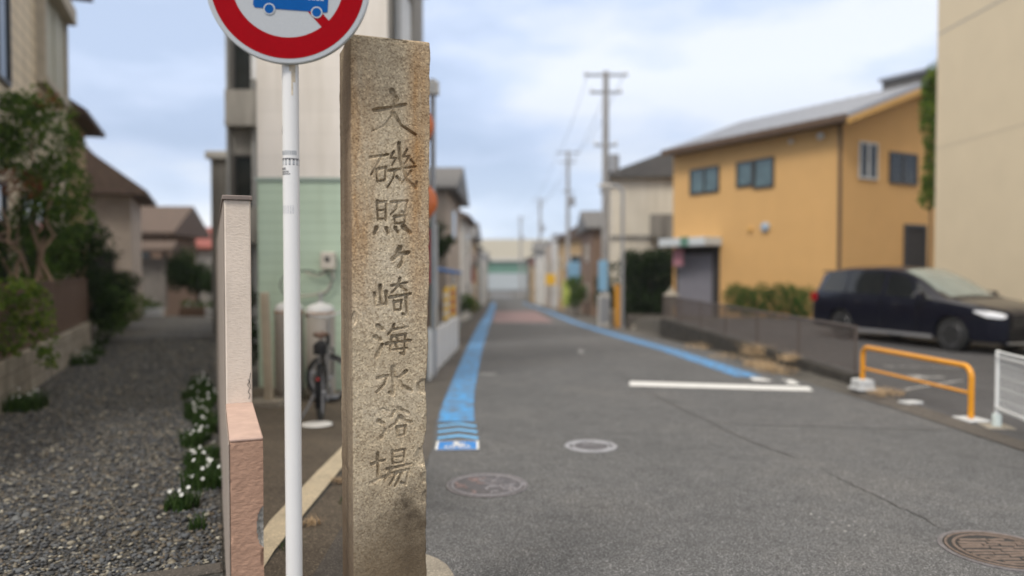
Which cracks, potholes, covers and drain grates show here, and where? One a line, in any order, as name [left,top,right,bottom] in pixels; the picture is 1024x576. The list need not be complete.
crack [829,473,944,529]
manhole cover [565,440,617,452]
crack [720,422,925,430]
manhole cover [446,473,528,498]
manhole cover [937,530,1024,572]
